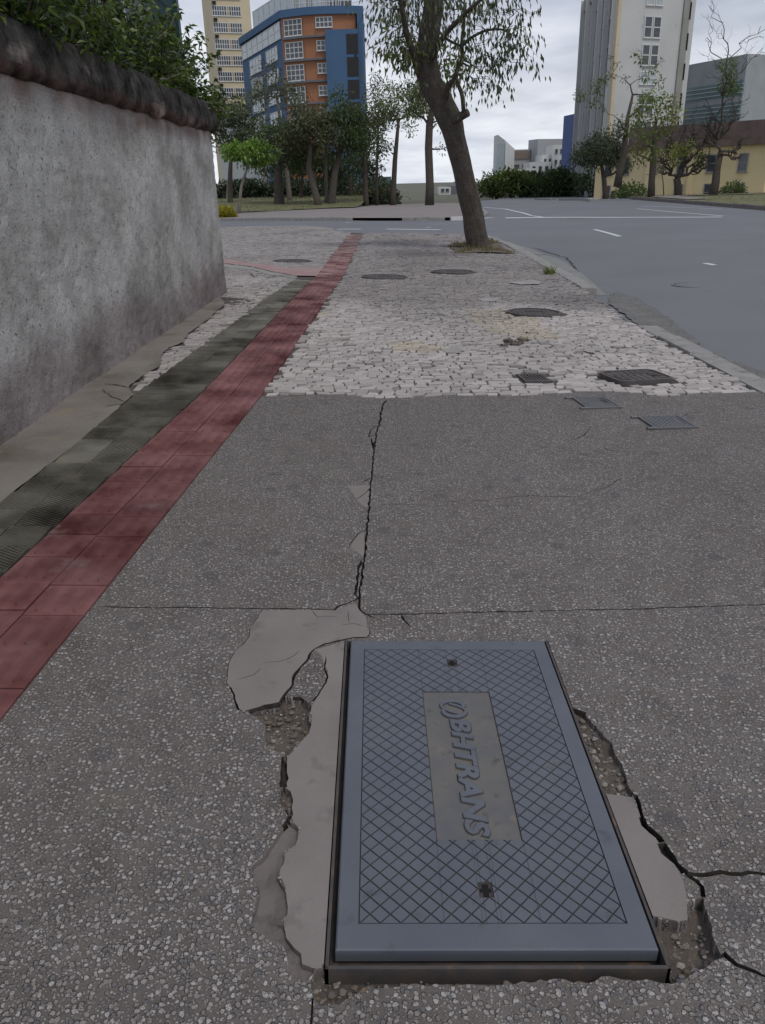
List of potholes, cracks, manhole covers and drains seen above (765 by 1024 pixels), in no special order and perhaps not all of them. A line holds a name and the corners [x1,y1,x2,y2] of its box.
pothole [279,788,293,817]
crack [573,708,765,977]
manhole cover [599,369,673,387]
manhole cover [507,308,561,318]
manhole cover [324,641,671,993]
drain grate [516,373,552,383]
crack [408,478,622,505]
pothole [248,697,312,765]
pothole [575,714,634,798]
